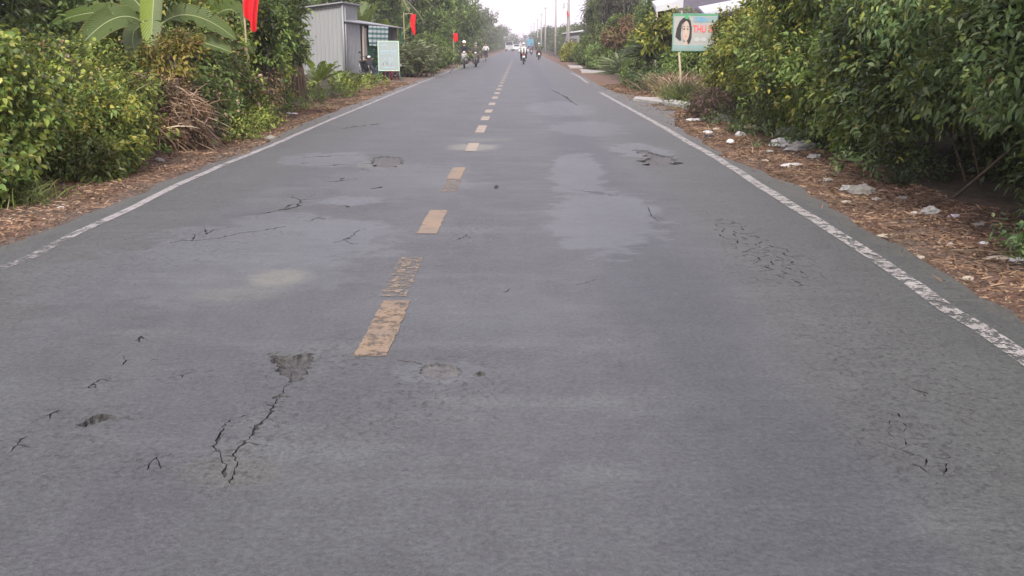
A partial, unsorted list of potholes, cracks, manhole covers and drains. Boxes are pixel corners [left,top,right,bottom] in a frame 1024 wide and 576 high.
crack [172,197,325,243]
pothole [370,156,405,168]
pothole [76,414,117,427]
pothole [633,150,683,168]
pothole [267,352,316,383]
crack [88,336,148,388]
crack [882,388,961,477]
crack [212,382,293,483]
